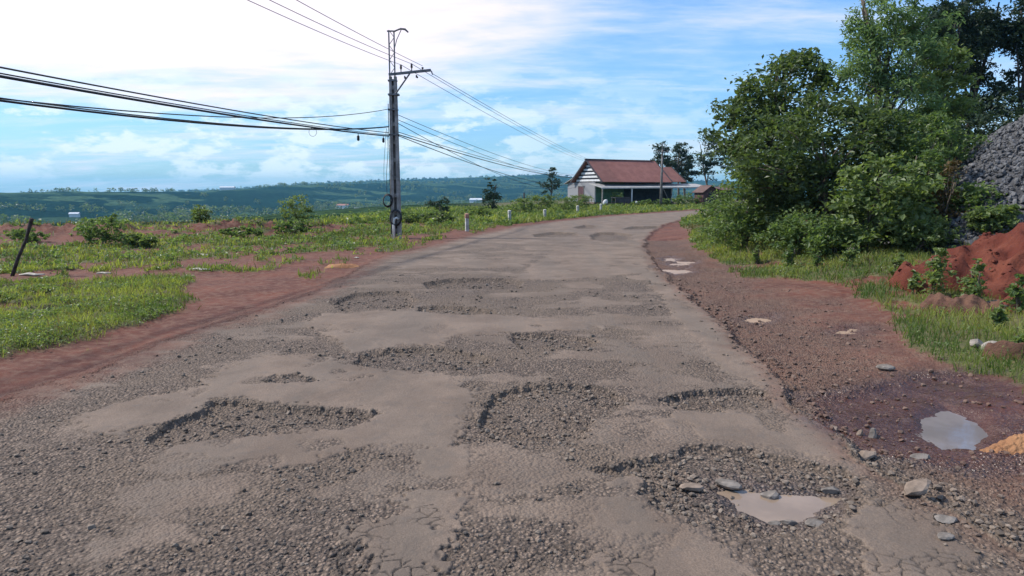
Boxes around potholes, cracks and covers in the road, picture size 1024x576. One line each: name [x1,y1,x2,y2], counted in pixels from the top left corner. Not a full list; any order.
pothole [424,277,525,290]
pothole [508,331,604,350]
pothole [472,383,635,447]
pothole [657,387,770,413]
pothole [590,232,634,242]
pothole [352,346,499,372]
pothole [144,397,386,448]
pothole [418,305,499,315]
pothole [586,443,867,537]
crack [324,503,456,576]
pothole [330,290,419,311]
crack [868,546,972,576]
